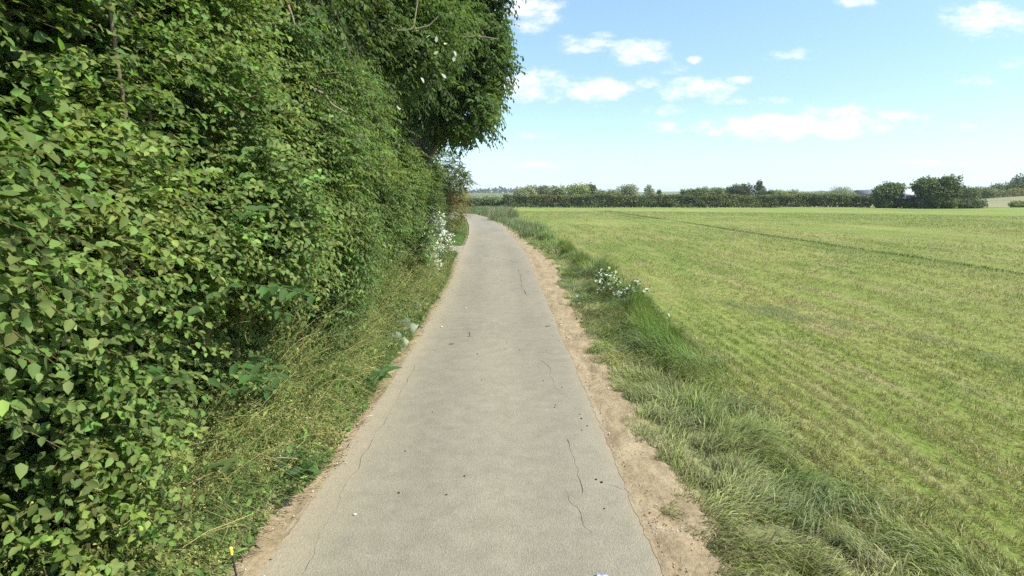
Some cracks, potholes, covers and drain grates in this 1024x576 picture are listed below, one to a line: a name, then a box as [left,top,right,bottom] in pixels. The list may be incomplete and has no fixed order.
crack [303,366,415,573]
crack [567,439,592,534]
